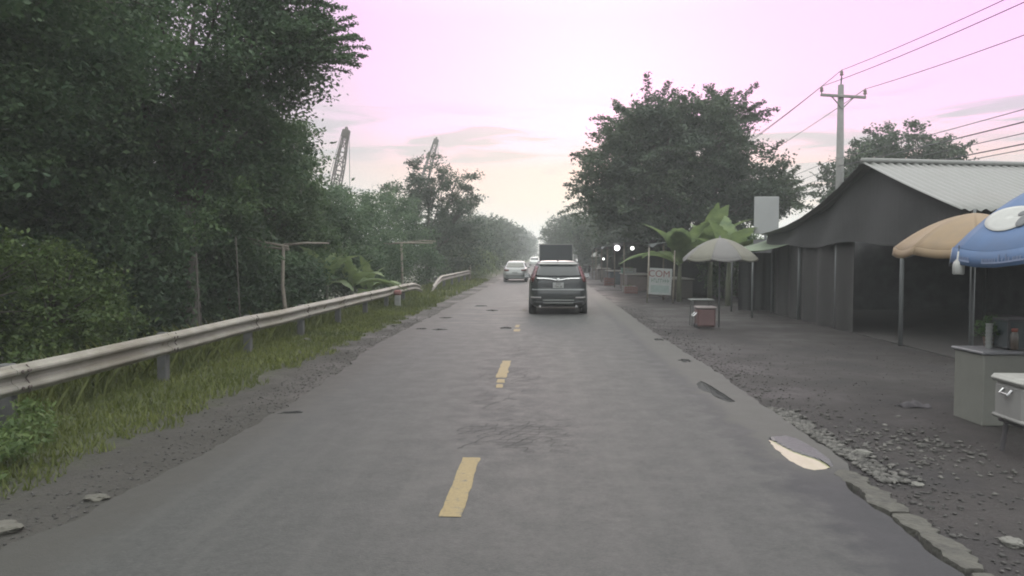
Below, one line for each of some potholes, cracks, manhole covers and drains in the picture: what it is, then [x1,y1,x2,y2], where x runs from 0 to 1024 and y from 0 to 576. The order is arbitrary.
pothole [768,435,833,470]
pothole [697,381,735,402]
crack [457,346,574,452]
